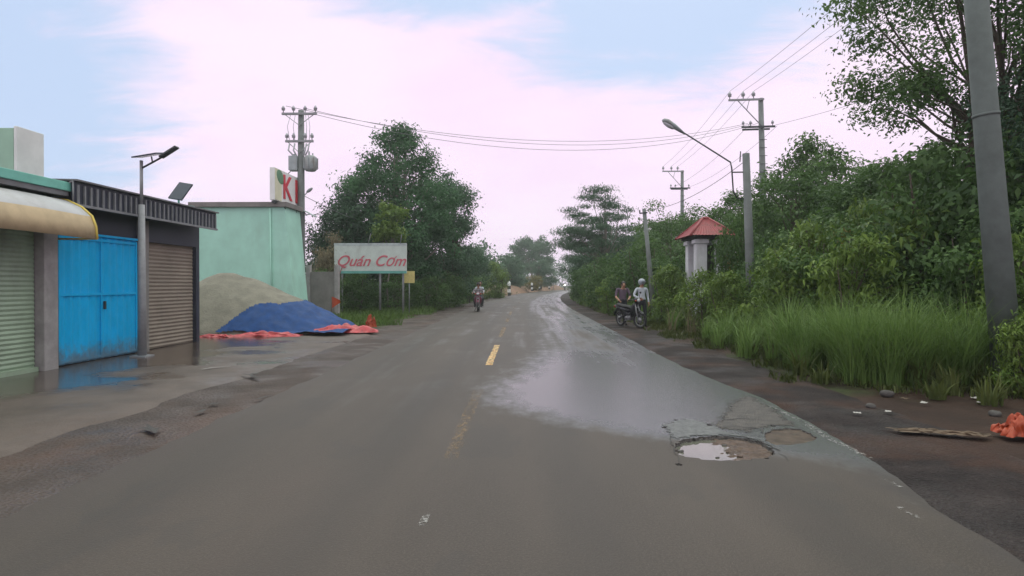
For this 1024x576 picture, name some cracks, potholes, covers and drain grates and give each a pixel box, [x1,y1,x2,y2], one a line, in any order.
pothole [673,436,775,461]
pothole [764,428,817,445]
